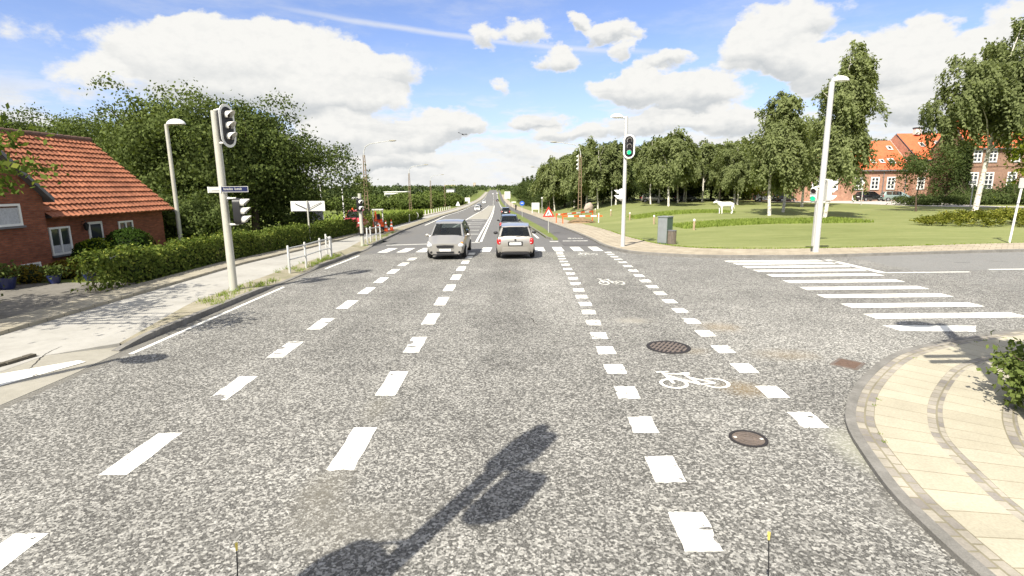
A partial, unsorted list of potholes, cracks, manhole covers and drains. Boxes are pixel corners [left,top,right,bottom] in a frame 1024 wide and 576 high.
manhole cover [646,341,691,354]
manhole cover [729,430,769,448]
